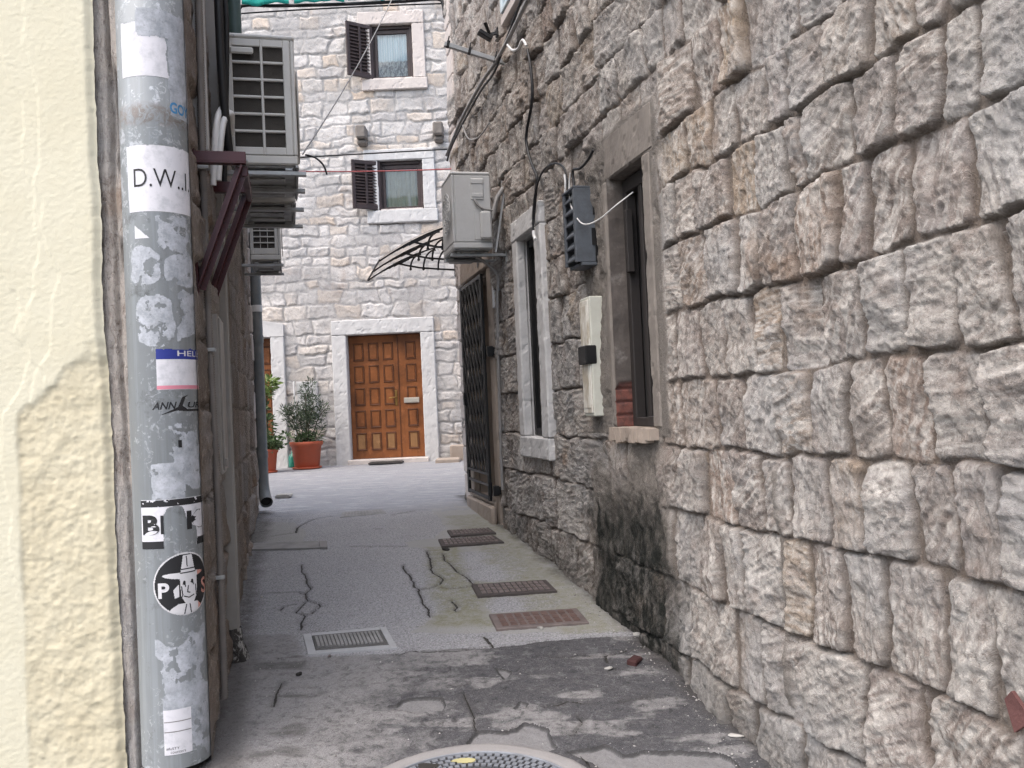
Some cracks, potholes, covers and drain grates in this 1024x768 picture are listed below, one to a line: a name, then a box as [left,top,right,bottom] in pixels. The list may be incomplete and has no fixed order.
pothole [466,722,558,752]
utility cover [438,535,504,548]
crack [402,552,473,617]
utility cover [447,527,496,538]
crack [280,565,321,630]
manhole cover [383,744,586,768]
utility cover [489,608,589,631]
utility cover [472,580,557,598]
pothole [388,696,446,714]
